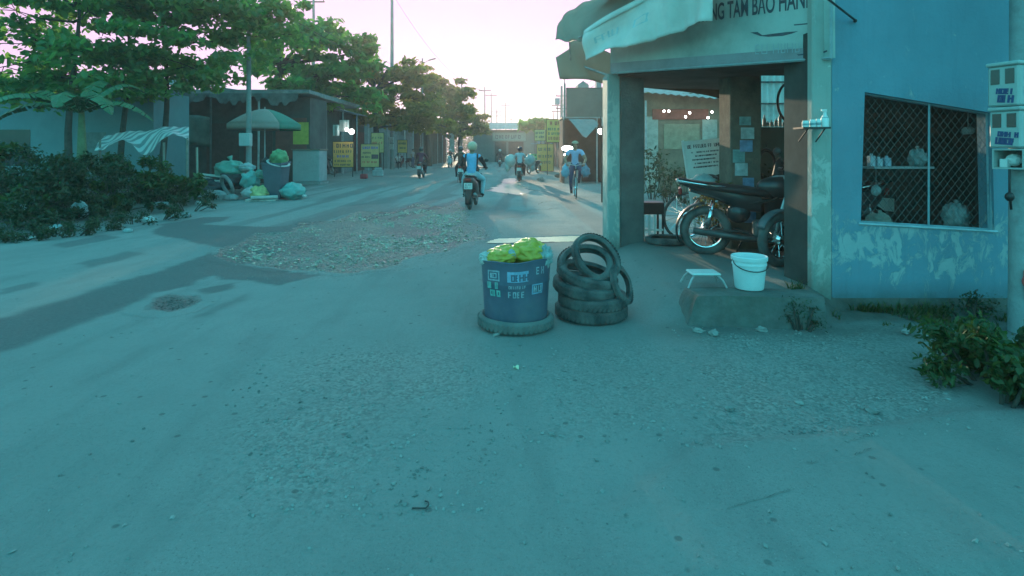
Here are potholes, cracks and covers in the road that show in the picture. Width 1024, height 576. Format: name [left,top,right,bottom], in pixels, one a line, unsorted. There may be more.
pothole [122,290,221,319]
